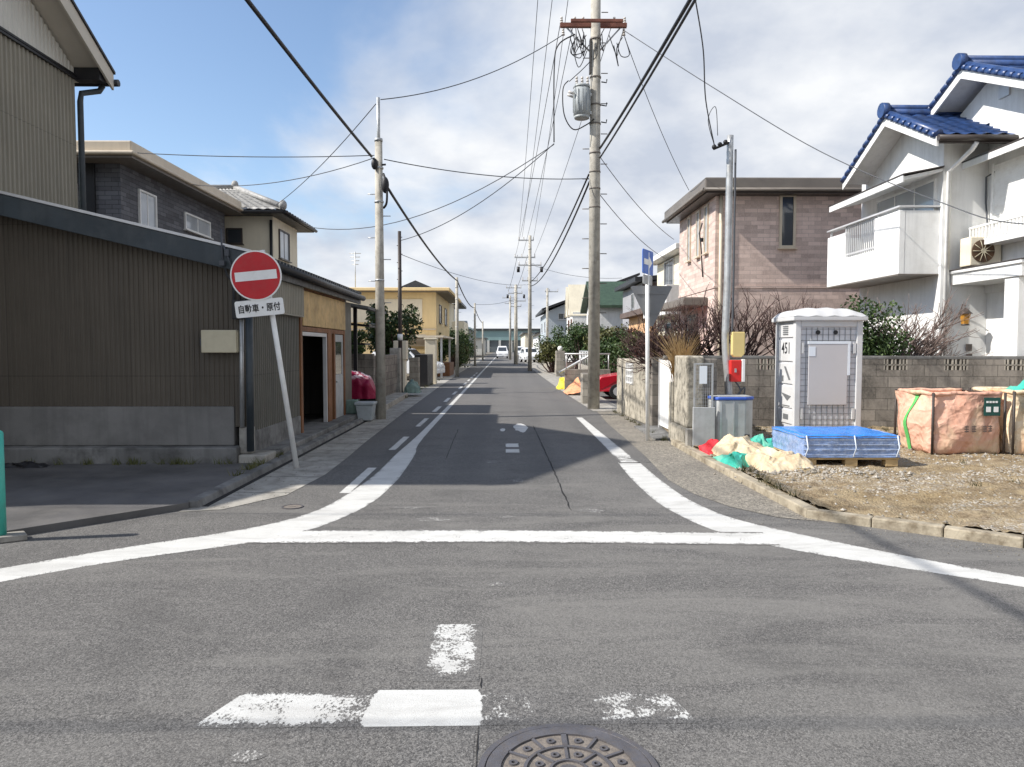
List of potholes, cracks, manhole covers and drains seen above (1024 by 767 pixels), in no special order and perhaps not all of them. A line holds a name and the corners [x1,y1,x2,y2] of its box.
manhole cover [478,723,659,767]
